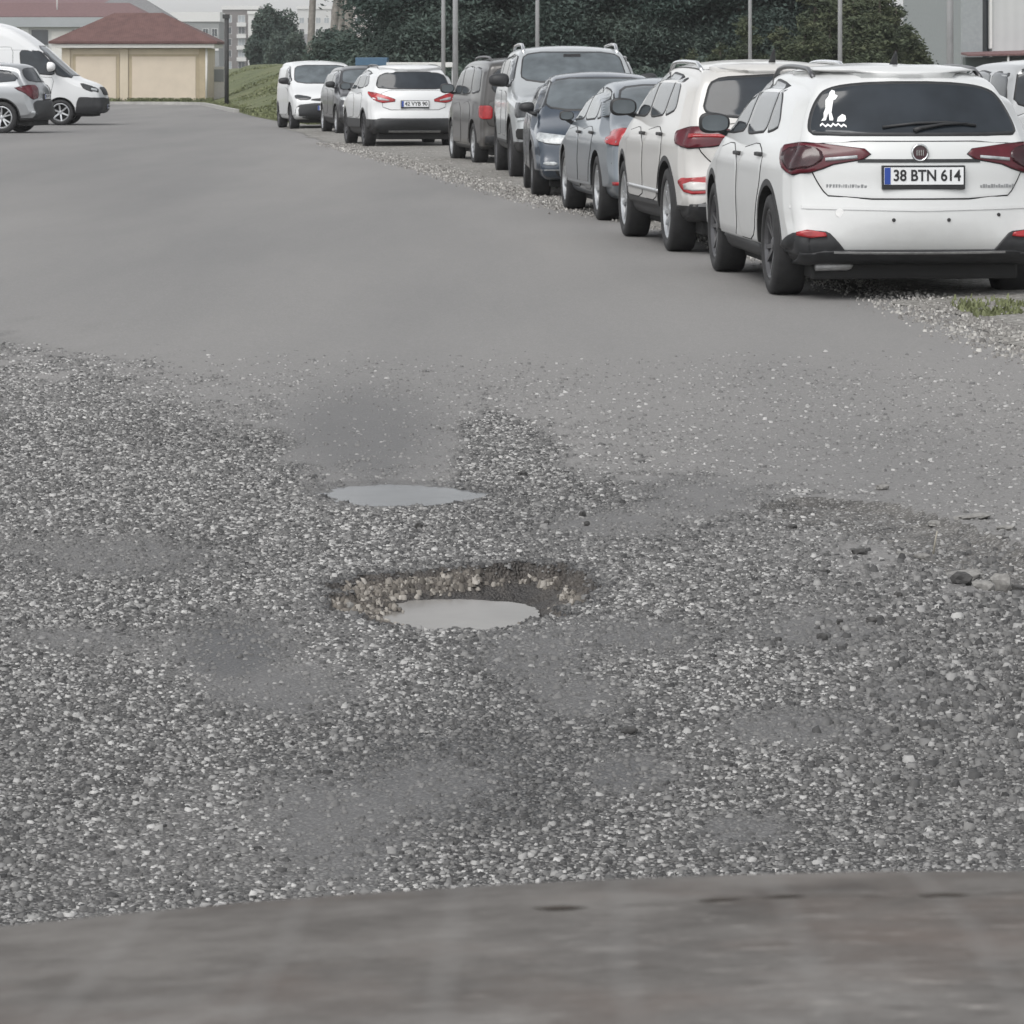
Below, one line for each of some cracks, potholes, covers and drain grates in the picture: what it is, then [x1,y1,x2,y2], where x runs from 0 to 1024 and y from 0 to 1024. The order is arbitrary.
pothole [320,560,603,628]
pothole [309,480,494,507]
